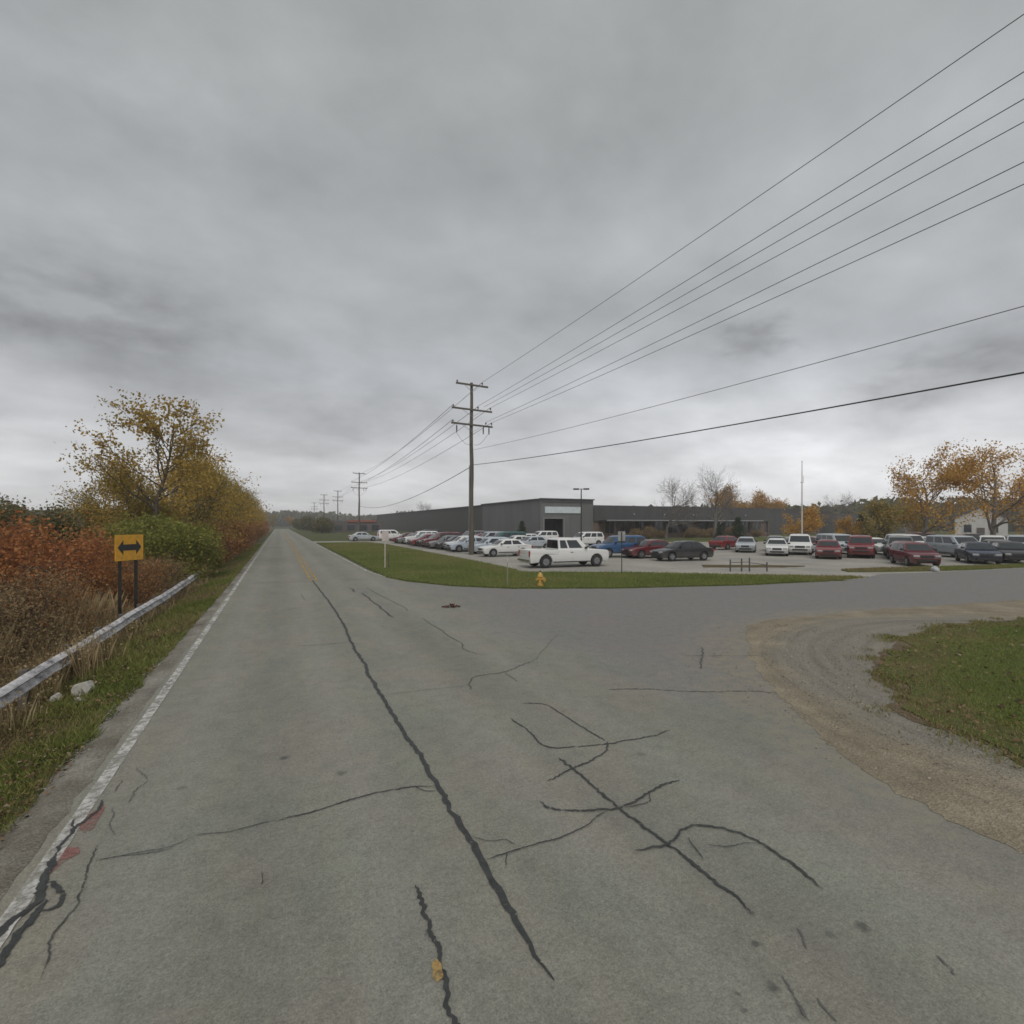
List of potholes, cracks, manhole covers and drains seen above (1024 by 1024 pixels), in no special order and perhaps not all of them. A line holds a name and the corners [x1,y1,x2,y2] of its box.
crack [782,975,837,1022]
crack [391,635,557,694]
crack [41,768,167,976]
